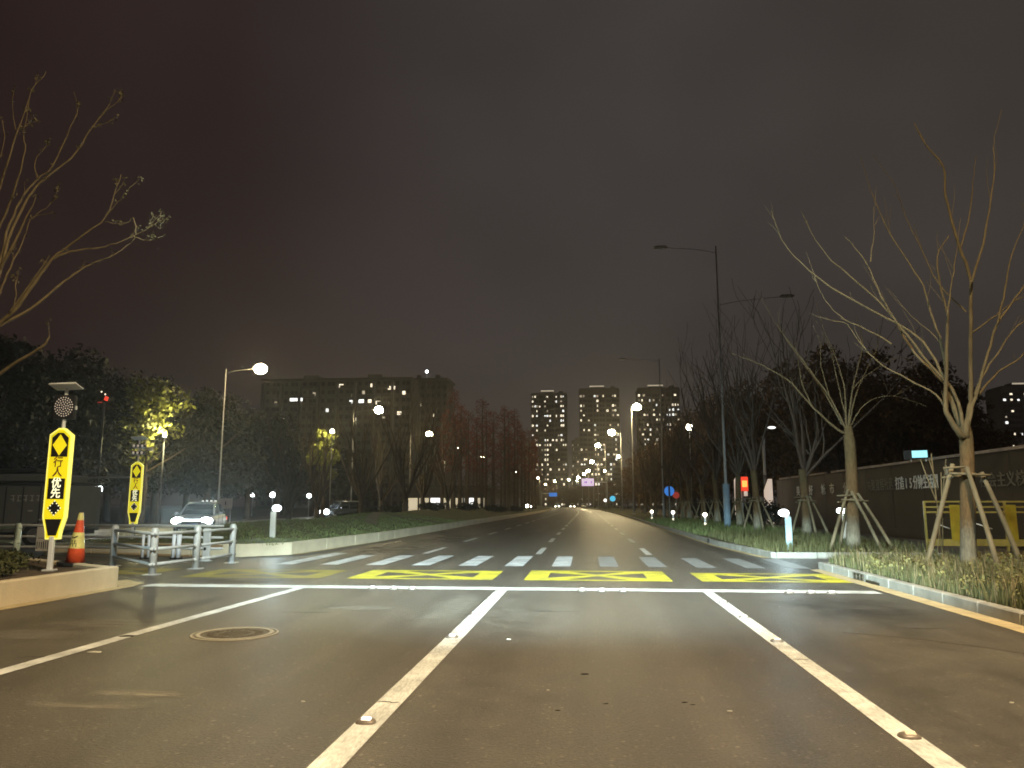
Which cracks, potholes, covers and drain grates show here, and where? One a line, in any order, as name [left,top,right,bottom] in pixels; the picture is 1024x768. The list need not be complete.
manhole cover [189,627,279,641]
